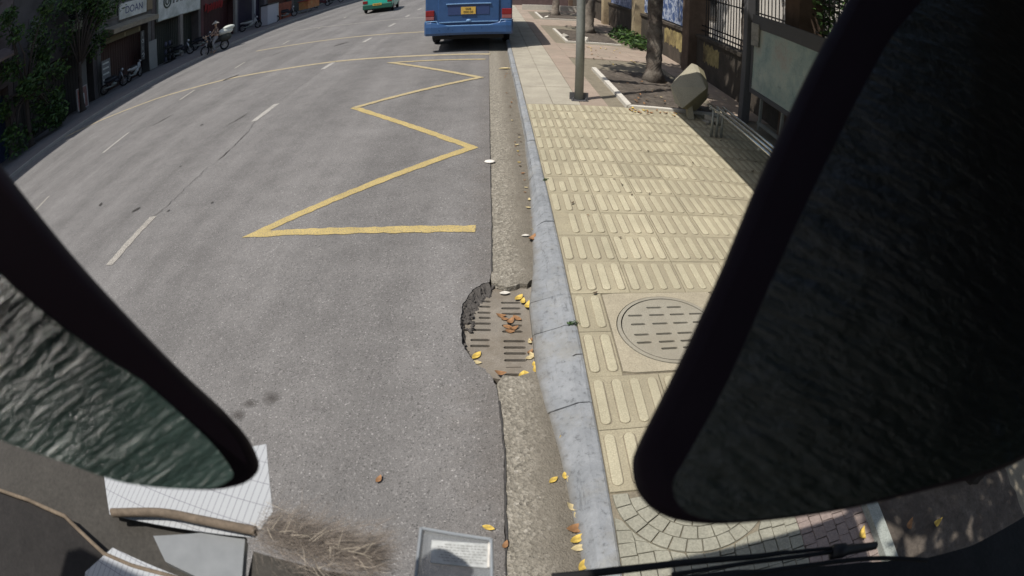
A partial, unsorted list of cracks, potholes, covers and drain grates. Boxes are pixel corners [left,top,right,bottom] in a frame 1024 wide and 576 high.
drain grate [465,287,534,385]
manhole cover [616,297,703,364]
